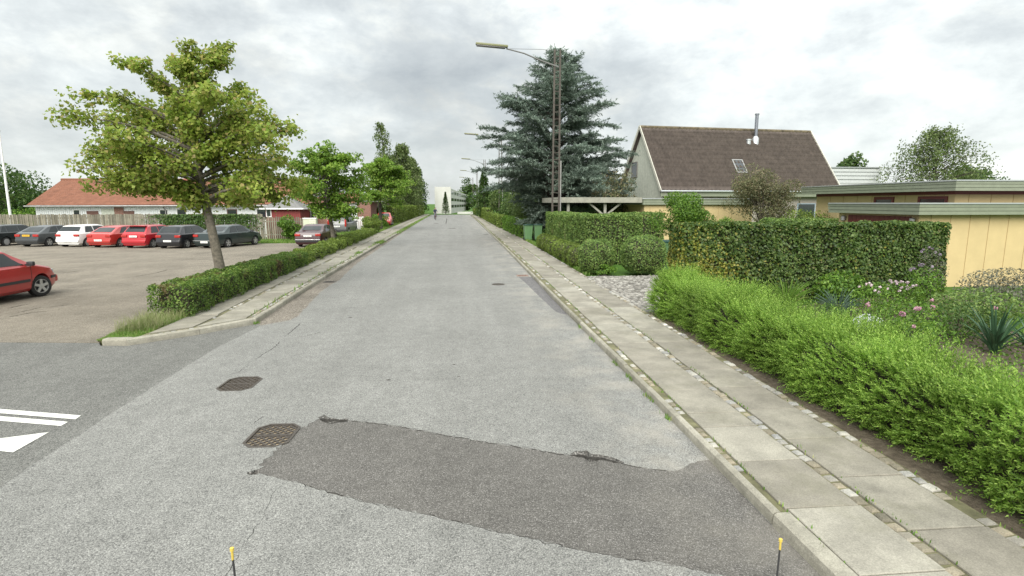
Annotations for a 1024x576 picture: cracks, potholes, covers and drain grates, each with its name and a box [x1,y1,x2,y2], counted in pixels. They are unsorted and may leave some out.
manhole cover [242,423,301,448]
manhole cover [216,376,263,391]
